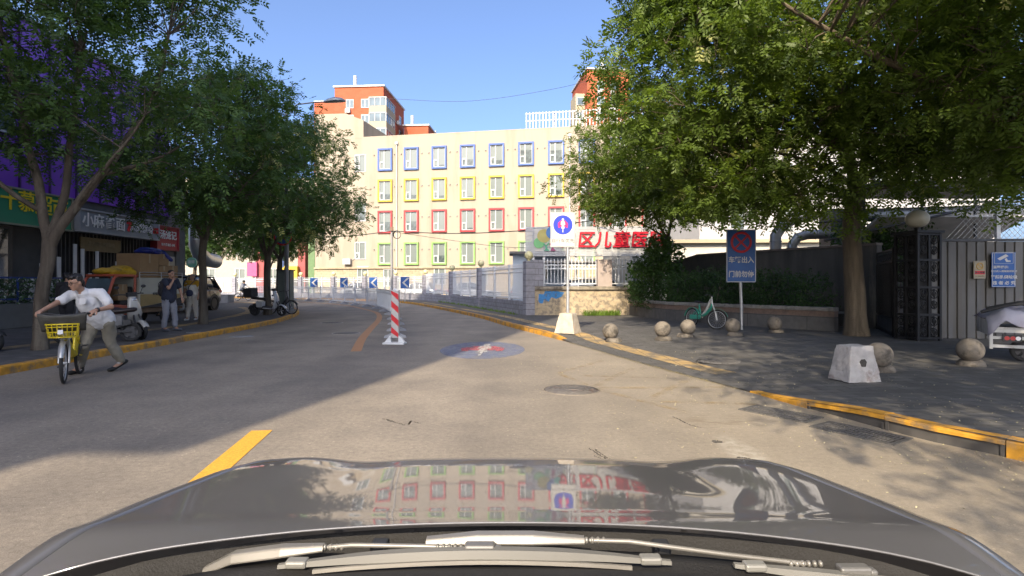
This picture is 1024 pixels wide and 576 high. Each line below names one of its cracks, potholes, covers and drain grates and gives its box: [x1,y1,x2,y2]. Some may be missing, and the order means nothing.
crack [583,447,618,459]
drain grate [809,421,913,446]
drain grate [738,405,824,423]
crack [665,415,707,429]
manhole cover [543,384,600,396]
crack [371,418,426,426]
